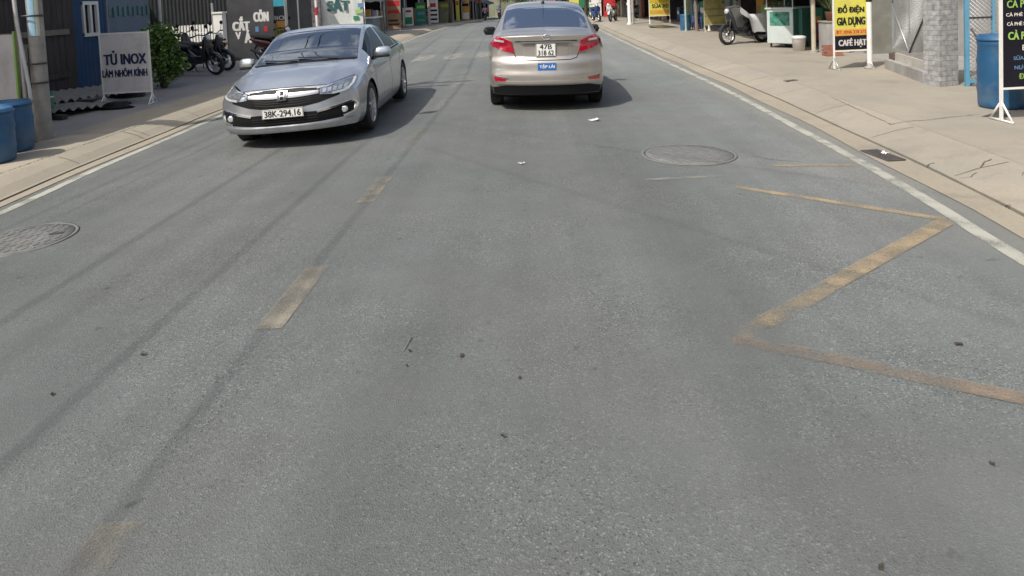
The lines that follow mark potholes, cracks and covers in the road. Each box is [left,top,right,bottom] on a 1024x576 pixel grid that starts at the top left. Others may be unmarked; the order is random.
manhole cover [0,222,79,258]
manhole cover [641,144,738,166]
drain grate [860,149,906,162]
